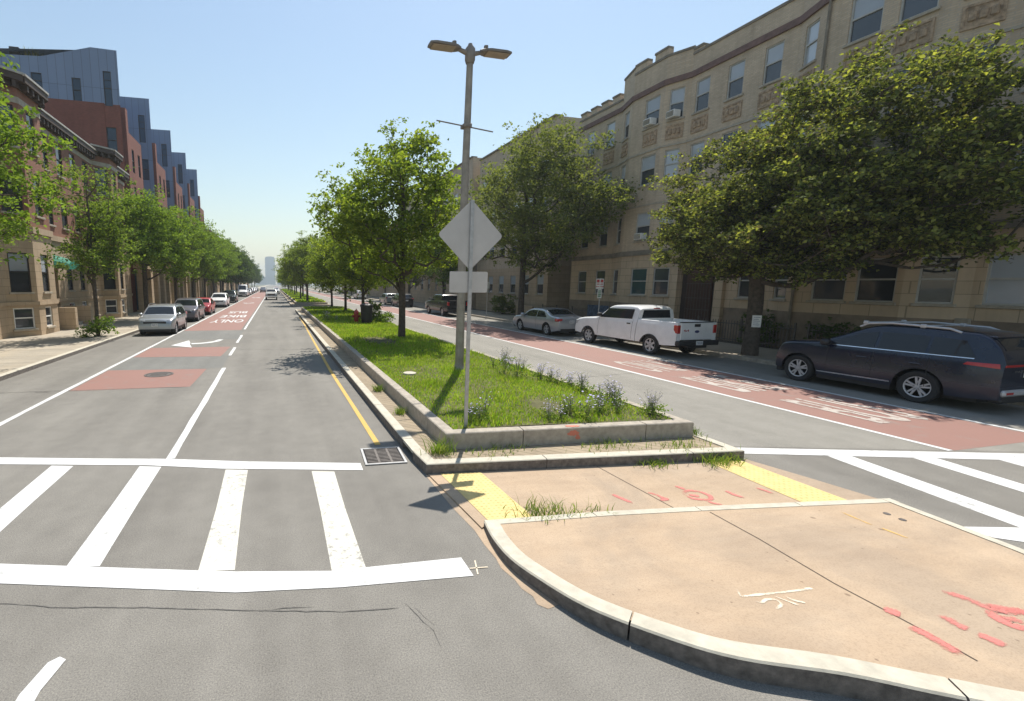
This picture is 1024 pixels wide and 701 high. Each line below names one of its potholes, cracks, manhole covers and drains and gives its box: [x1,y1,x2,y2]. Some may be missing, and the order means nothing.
drain grate [360,446,408,466]
